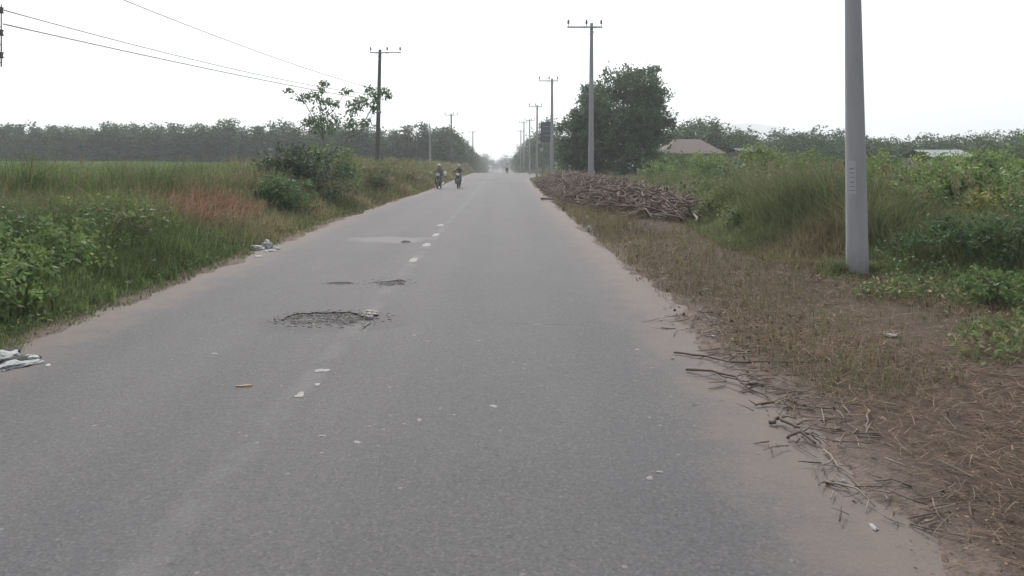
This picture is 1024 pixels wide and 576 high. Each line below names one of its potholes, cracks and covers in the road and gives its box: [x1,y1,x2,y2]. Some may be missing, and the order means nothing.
pothole [356,278,416,287]
pothole [273,310,395,328]
